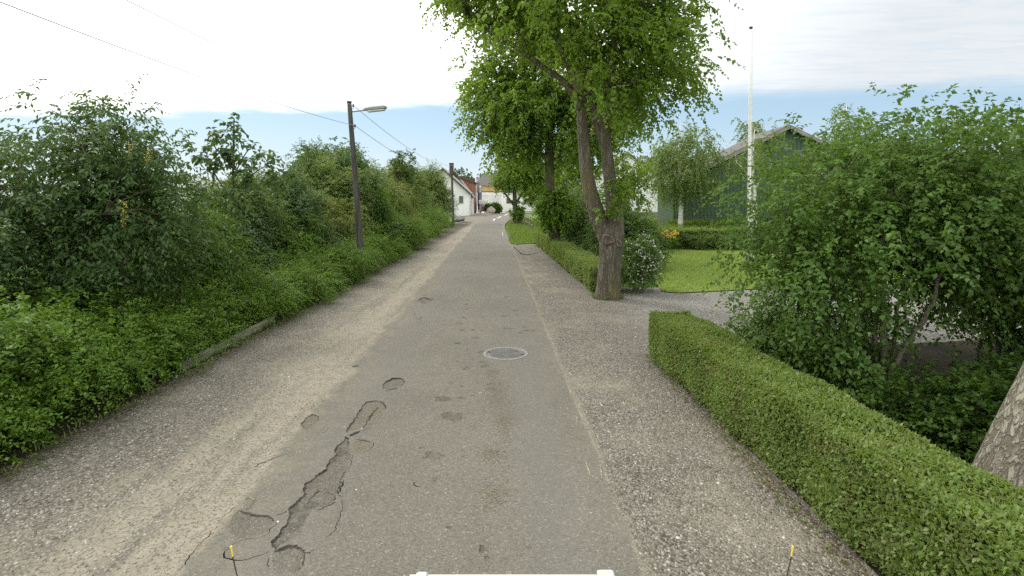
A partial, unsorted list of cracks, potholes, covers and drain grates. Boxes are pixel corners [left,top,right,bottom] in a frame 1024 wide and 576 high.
pothole [383,378,405,389]
crack [304,443,374,554]
pothole [301,414,319,430]
pothole [352,439,373,453]
pothole [346,401,386,433]
crack [179,506,285,571]
manhole cover [483,347,528,360]
pothole [272,545,306,573]
pothole [271,436,351,550]
pothole [228,510,274,539]
